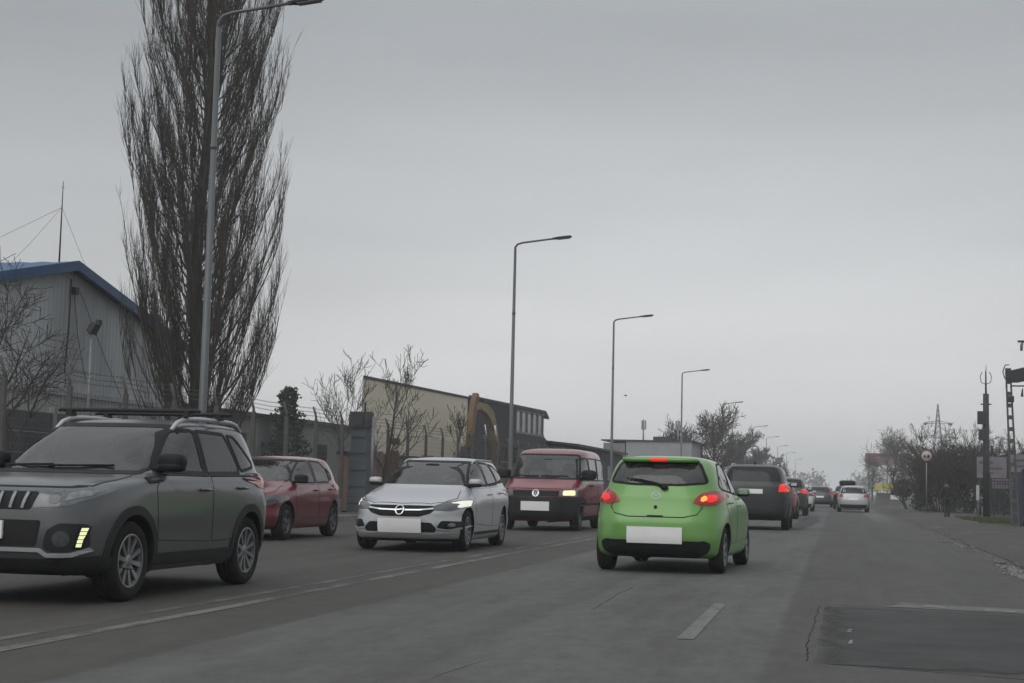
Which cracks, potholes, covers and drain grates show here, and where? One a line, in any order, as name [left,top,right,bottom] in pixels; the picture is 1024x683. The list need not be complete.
crack [805,605,821,662]
